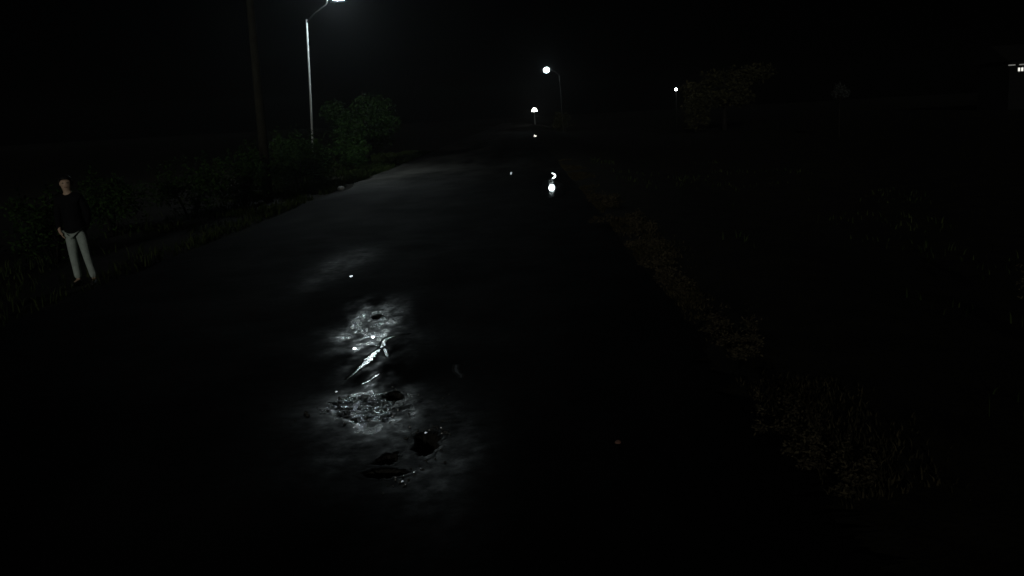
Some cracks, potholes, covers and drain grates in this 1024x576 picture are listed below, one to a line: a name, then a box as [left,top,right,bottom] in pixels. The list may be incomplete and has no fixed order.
pothole [404,427,448,462]
pothole [365,449,404,471]
pothole [352,466,420,482]
pothole [378,389,409,404]
